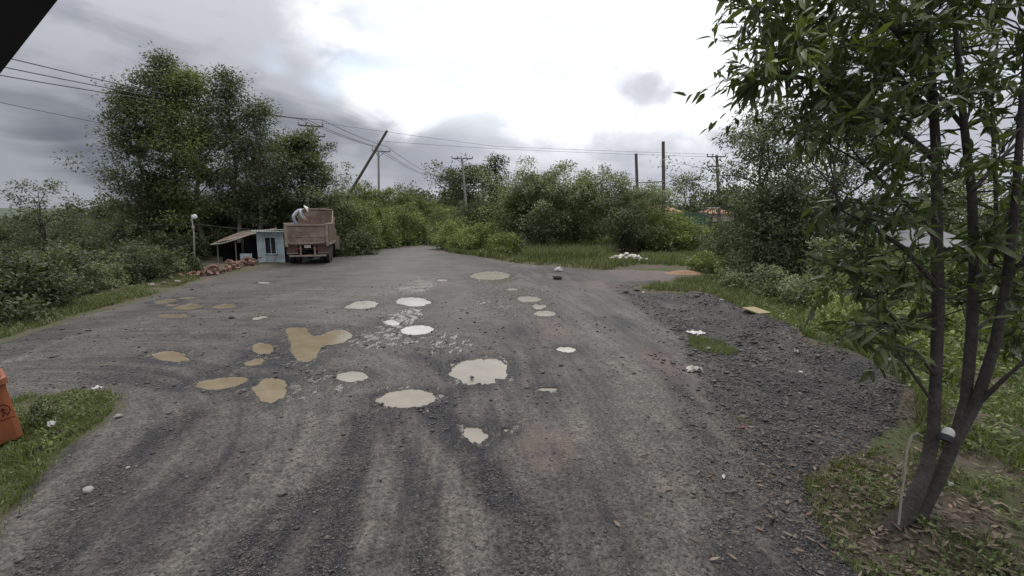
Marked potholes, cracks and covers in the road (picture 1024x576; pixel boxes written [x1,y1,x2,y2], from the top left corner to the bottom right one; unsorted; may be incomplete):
pothole [462,426,489,443]
pothole [396,297,432,307]
pothole [447,357,510,385]
pothole [469,271,510,280]
pothole [150,350,190,362]
pothole [344,300,379,309]
pothole [335,370,369,382]
pothole [374,388,438,408]
pothole [285,327,353,362]
pothole [251,342,274,354]
pothole [243,357,265,366]
pothole [194,376,249,390]
